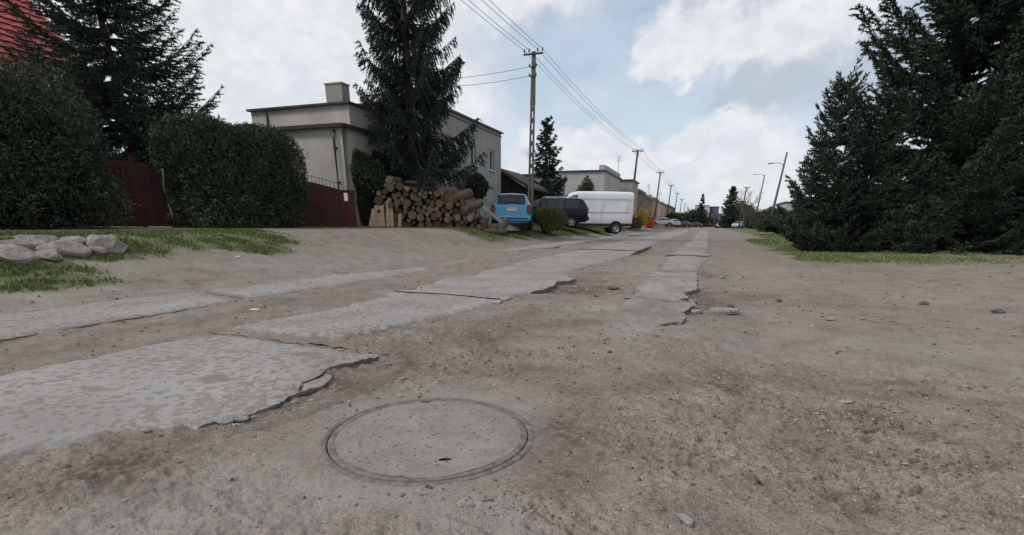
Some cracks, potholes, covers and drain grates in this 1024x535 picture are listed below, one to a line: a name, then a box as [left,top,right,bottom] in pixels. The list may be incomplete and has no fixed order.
crack [299,369,327,391]
manhole cover [320,398,534,487]
